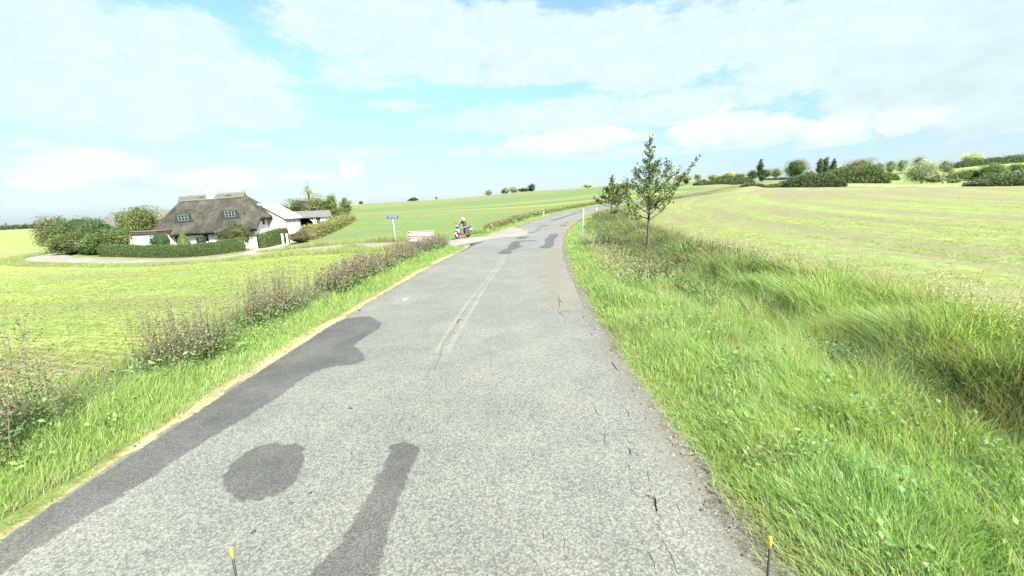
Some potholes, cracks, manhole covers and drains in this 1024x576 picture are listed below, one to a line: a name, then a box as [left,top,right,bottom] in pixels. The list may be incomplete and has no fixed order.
crack [581,392,684,575]
